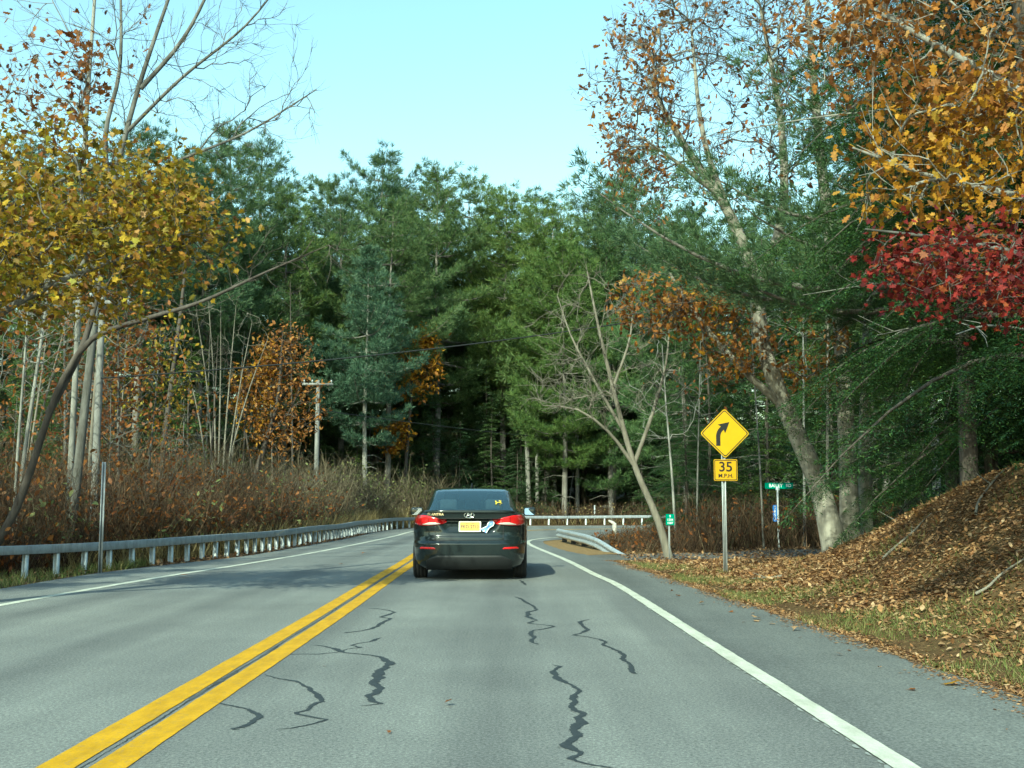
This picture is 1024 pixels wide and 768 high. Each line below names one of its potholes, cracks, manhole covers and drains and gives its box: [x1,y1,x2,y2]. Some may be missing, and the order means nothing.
crack [516,580,555,644]
crack [549,619,637,768]
crack [212,674,328,730]
crack [318,608,396,706]
